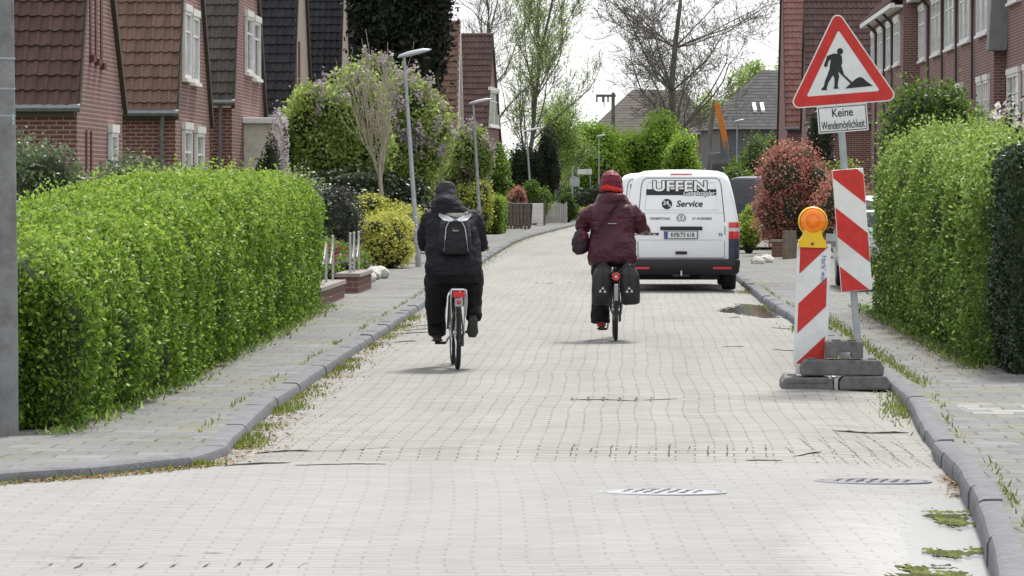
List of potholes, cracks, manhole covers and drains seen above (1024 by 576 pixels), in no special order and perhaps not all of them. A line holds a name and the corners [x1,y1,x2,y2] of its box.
crack [786,428,909,457]
crack [226,446,393,466]
